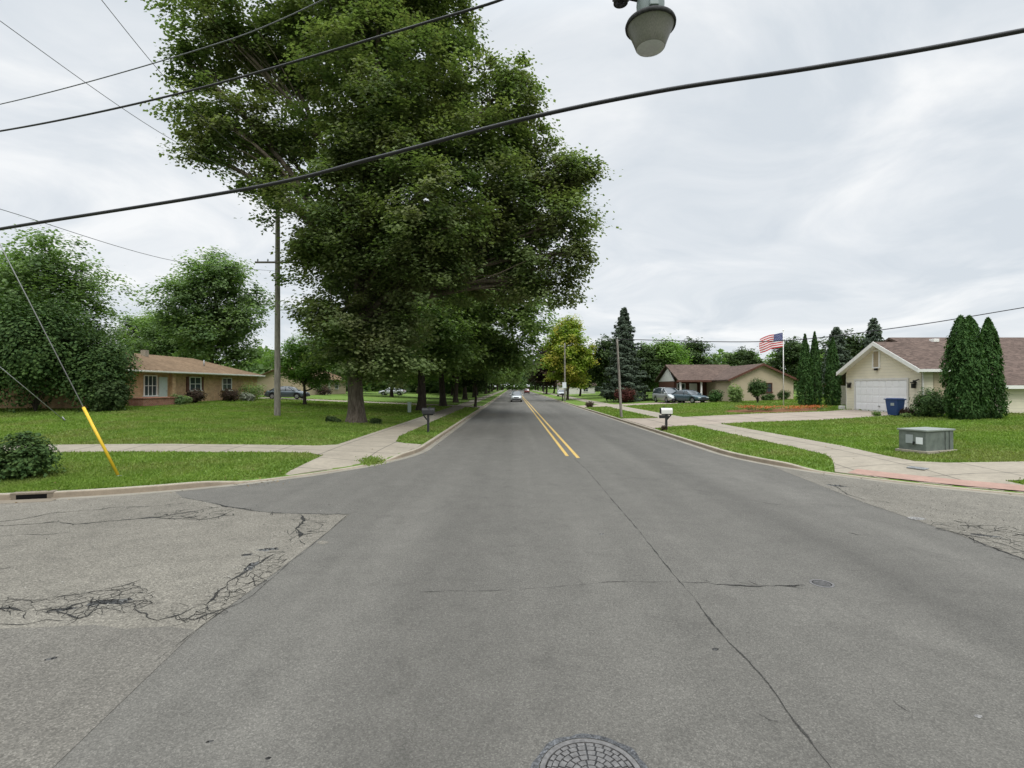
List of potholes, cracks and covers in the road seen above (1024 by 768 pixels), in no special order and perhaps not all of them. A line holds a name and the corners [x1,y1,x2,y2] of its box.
drain grate [0,487,66,504]
crack [0,497,338,626]
utility cover [809,579,835,588]
crack [688,579,806,589]
crack [931,521,1024,559]
manhole cover [540,738,640,768]
